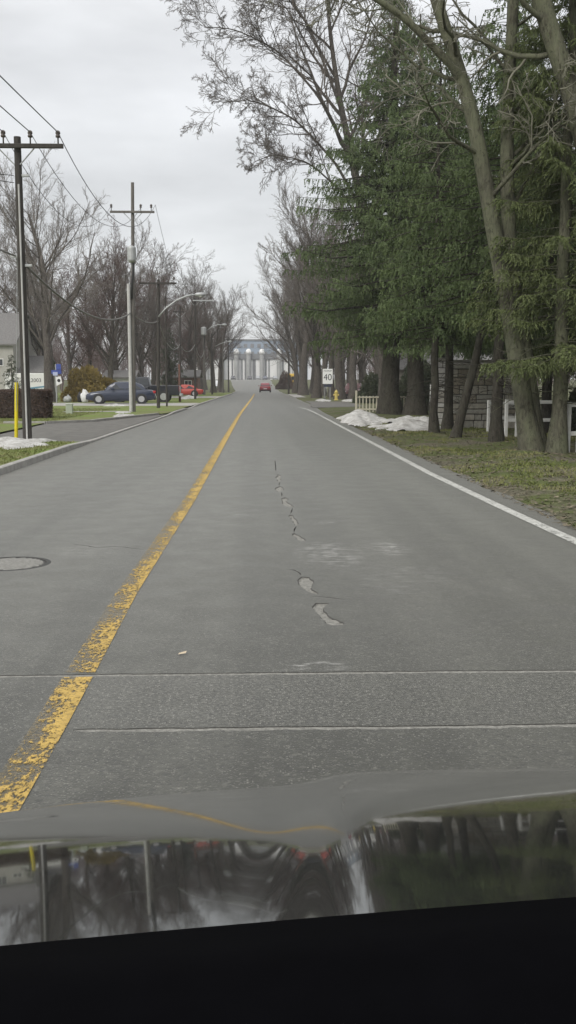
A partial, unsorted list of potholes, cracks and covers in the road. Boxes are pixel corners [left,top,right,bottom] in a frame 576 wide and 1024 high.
pothole [297,577,318,594]
pothole [312,603,345,625]
manhole cover [0,556,51,571]
